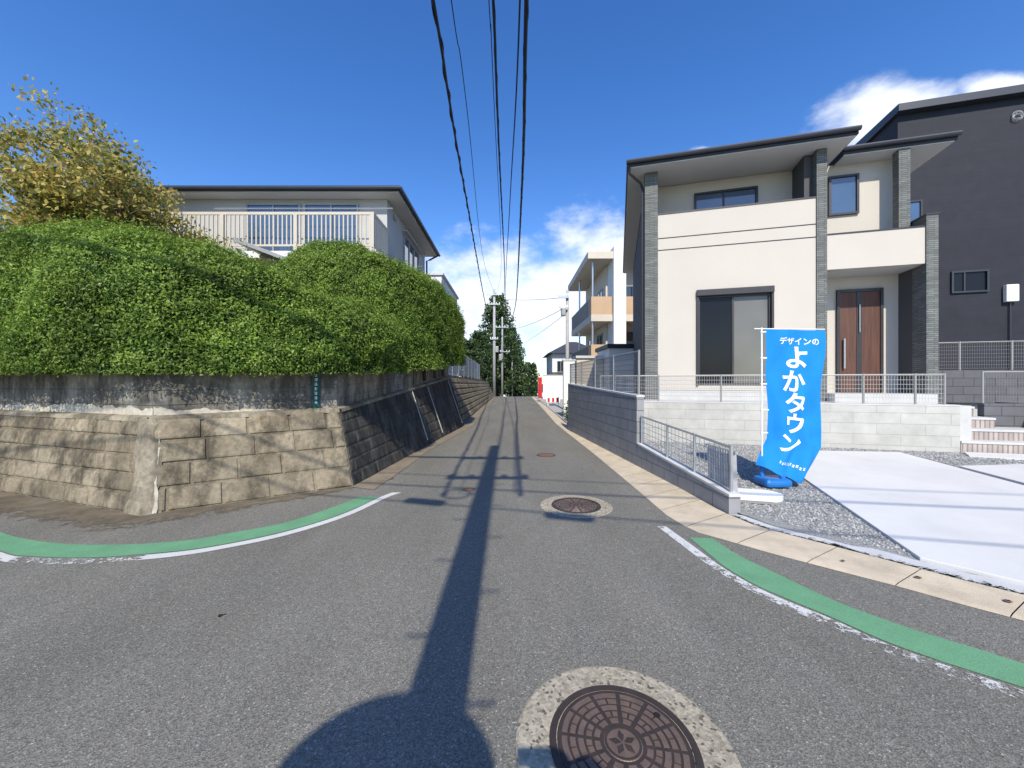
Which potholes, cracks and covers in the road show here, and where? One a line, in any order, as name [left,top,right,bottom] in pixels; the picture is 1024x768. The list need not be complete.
manhole cover [540,495,613,518]
manhole cover [516,666,742,768]
